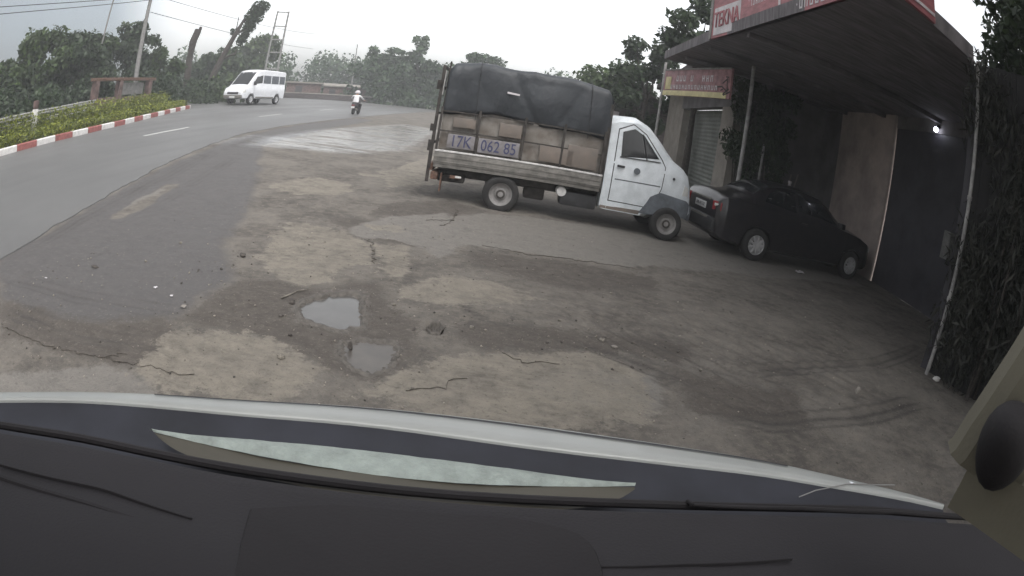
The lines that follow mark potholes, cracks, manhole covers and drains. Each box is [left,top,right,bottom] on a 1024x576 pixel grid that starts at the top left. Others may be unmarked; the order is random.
pothole [427,321,446,335]
crack [2,324,194,375]
pothole [335,337,404,378]
crack [406,378,467,391]
pothole [290,290,372,334]
